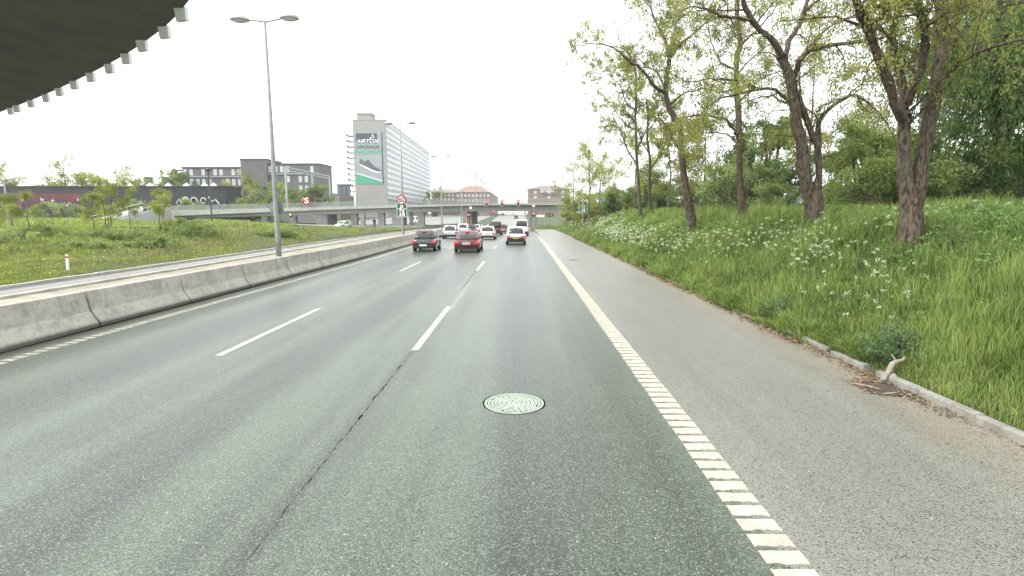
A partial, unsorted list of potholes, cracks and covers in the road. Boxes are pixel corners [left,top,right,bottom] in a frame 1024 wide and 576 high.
manhole cover [483,393,545,415]
crack [240,361,405,569]
